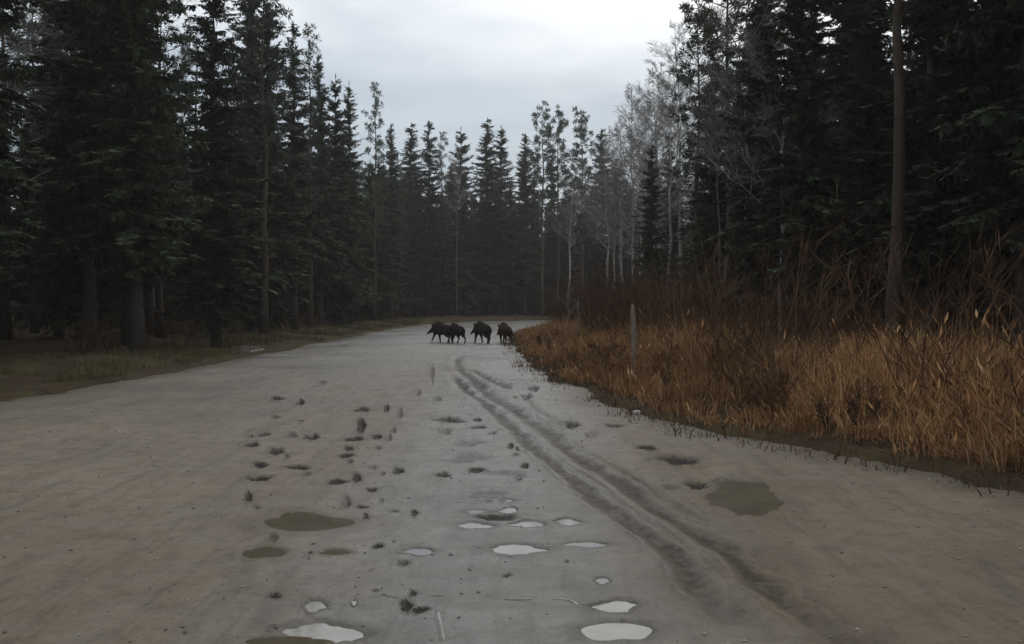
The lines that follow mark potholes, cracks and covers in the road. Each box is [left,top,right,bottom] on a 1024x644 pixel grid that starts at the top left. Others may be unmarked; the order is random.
pothole [476,540,560,557]
pothole [462,513,524,522]
pothole [248,506,379,534]
pothole [495,505,519,514]
pothole [231,543,295,561]
pothole [688,473,801,525]
pothole [569,617,664,642]
